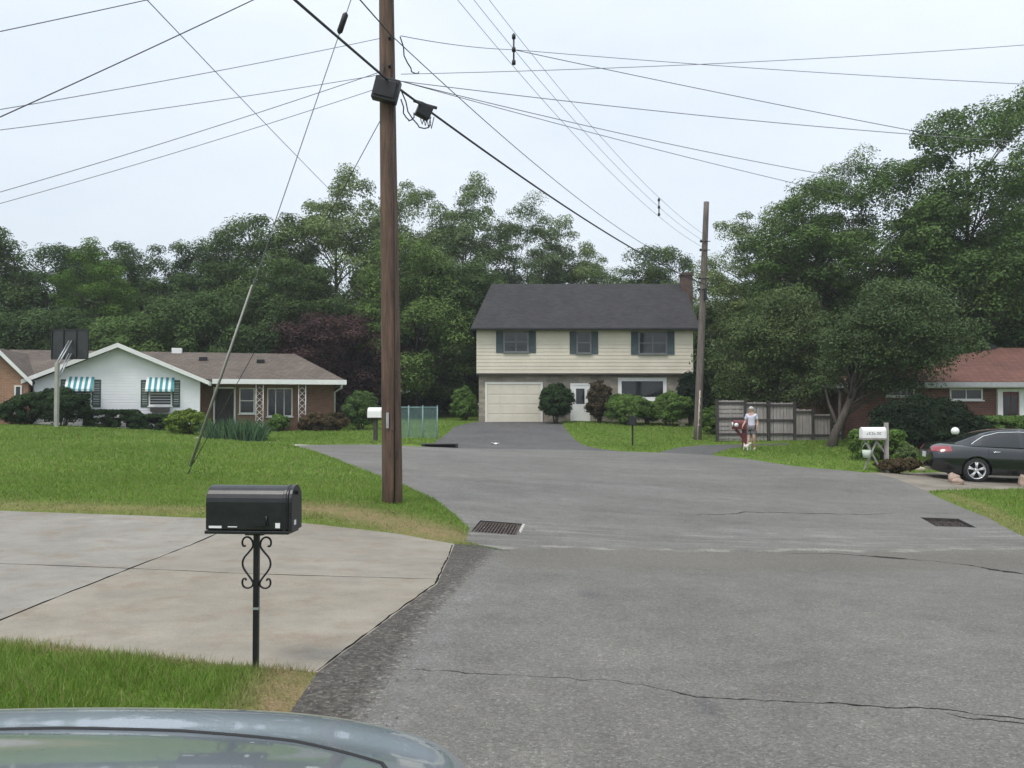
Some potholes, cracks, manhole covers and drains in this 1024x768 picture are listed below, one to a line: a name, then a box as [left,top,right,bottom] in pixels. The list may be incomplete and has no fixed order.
drain grate [921,517,976,528]
crack [788,553,1023,574]
crack [413,669,1024,724]
drain grate [471,520,525,535]
